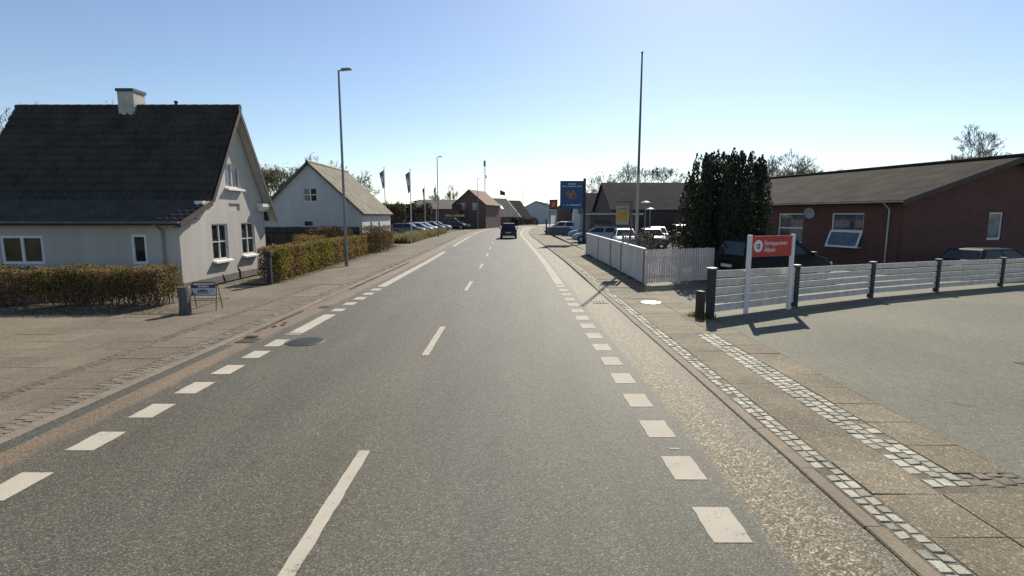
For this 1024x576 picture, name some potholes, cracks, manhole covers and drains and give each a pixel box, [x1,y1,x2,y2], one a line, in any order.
manhole cover [285,337,326,346]
